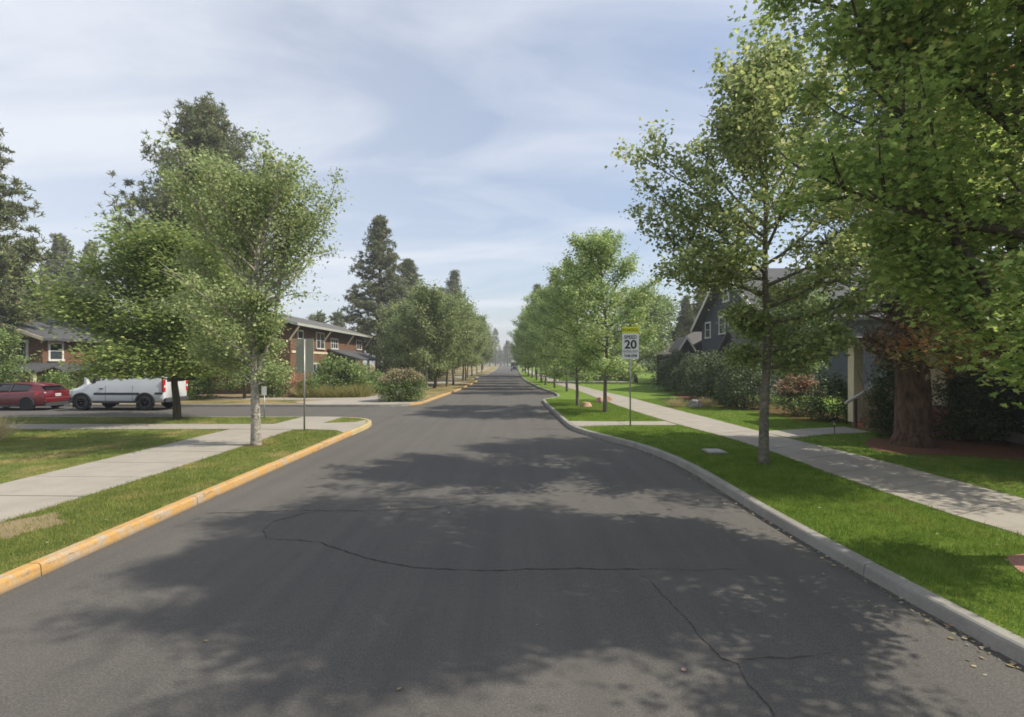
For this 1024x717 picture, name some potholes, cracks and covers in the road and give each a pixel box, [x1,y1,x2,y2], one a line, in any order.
crack [217,500,827,717]
